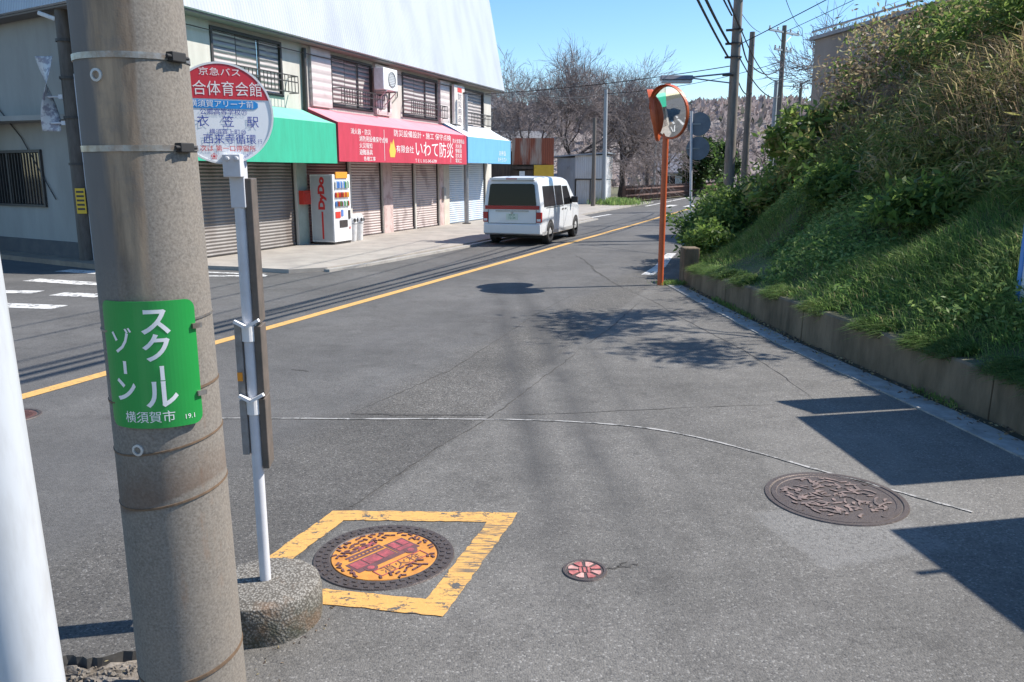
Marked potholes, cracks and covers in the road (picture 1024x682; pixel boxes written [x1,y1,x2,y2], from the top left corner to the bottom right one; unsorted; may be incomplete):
manhole cover [313,525,454,591]
manhole cover [764,472,910,527]
crack [606,561,638,569]
utility cover [562,559,607,582]
manhole cover [24,408,42,420]
